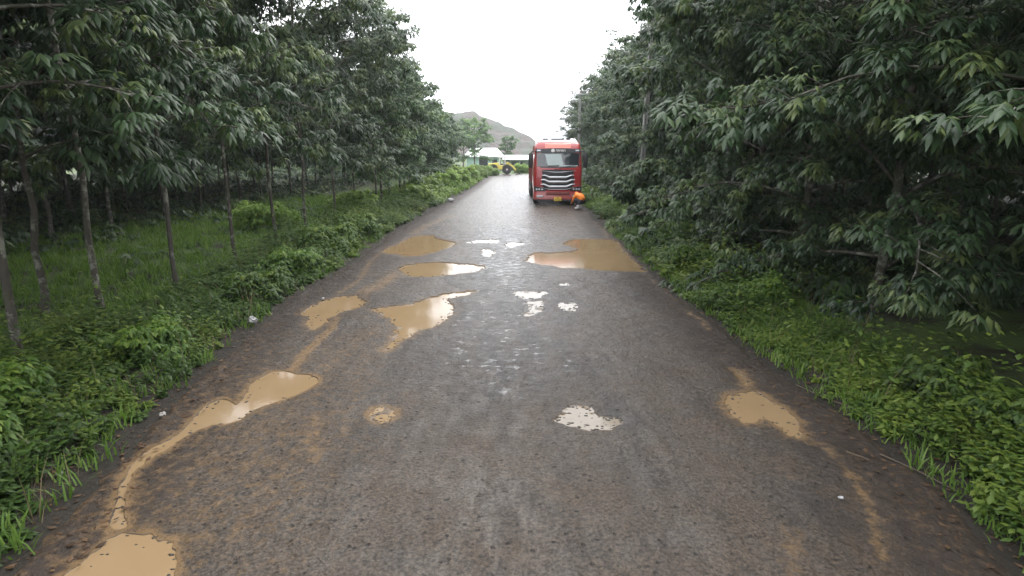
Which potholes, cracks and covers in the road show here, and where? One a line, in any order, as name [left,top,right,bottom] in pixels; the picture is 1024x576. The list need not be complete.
pothole [554,405,623,431]
pothole [522,300,545,316]
pothole [299,295,367,330]
pothole [724,391,804,438]
pothole [381,235,456,256]
pothole [369,406,395,424]
pothole [62,532,178,576]
pothole [109,370,318,530]
pothole [524,239,647,272]
pothole [398,262,485,277]
pothole [557,302,578,311]
pothole [513,291,548,299]
